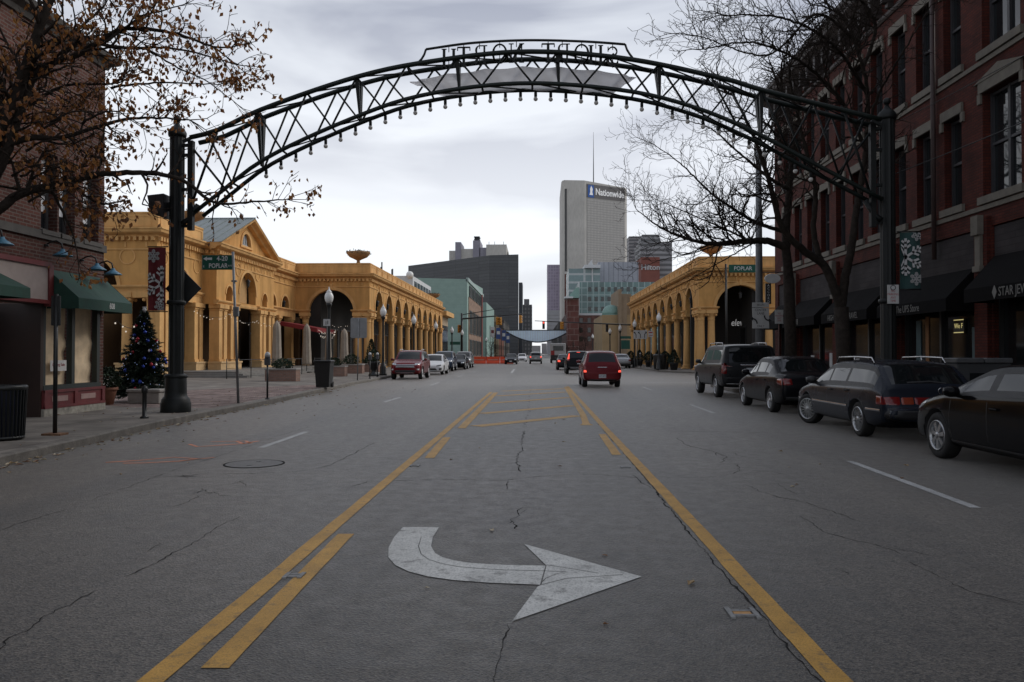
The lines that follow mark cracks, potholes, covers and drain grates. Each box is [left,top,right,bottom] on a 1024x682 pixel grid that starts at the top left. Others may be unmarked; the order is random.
manhole cover [223,460,285,468]
crack [0,503,268,649]
